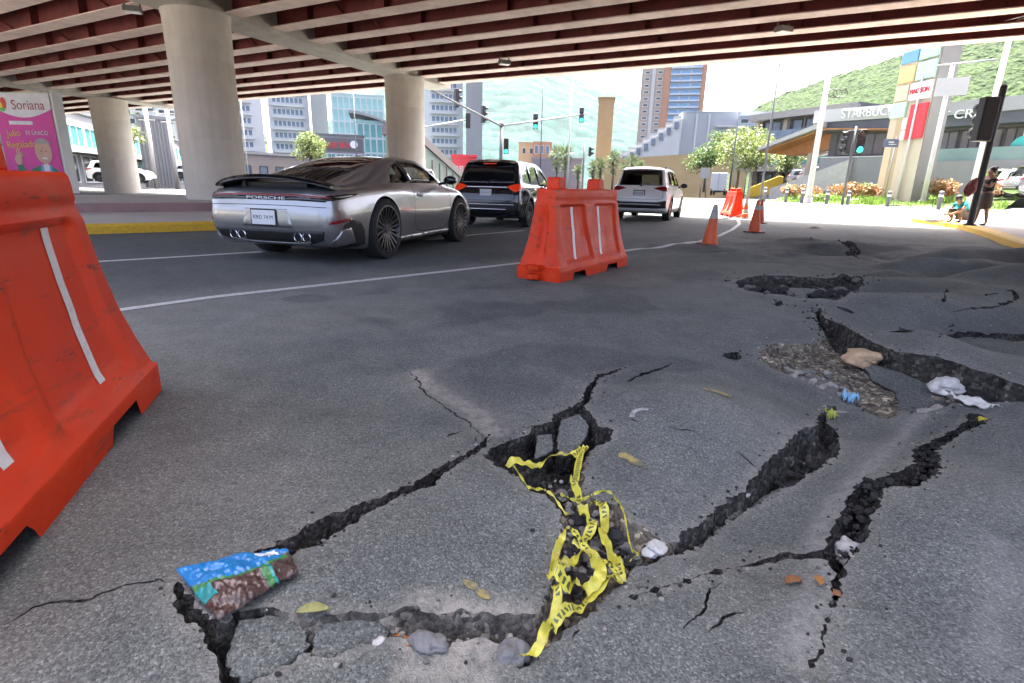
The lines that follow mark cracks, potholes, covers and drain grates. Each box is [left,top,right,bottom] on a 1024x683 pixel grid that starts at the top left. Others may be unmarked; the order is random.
pothole [758,332,959,419]
crack [4,289,1024,683]
pothole [735,274,864,300]
pothole [511,453,674,649]
